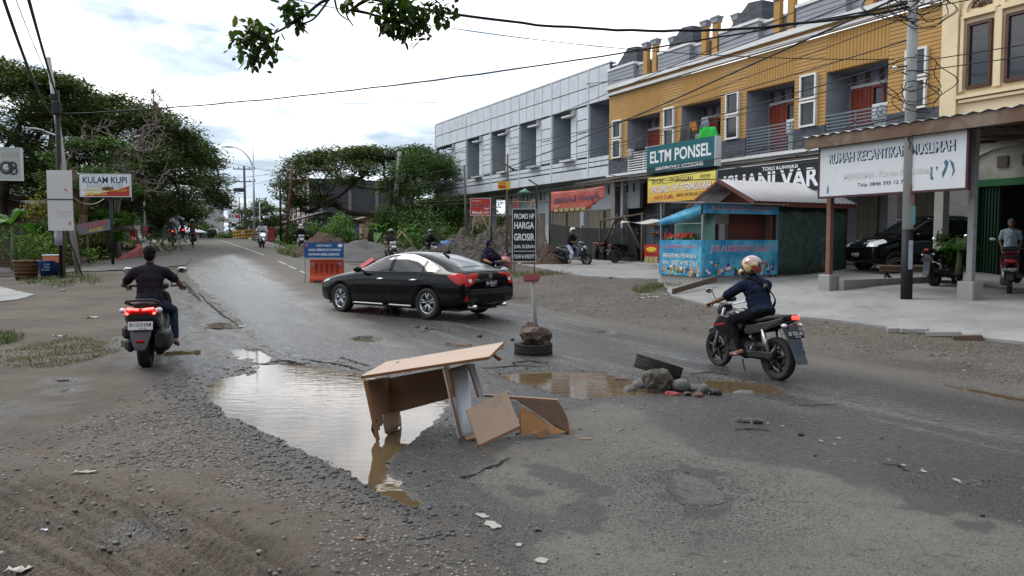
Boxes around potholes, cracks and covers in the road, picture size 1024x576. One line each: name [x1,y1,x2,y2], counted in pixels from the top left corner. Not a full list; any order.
pothole [495,369,658,399]
crack [183,281,238,326]
crack [460,458,509,478]
pothole [200,362,451,514]
pothole [224,348,276,363]
crack [267,356,370,371]
